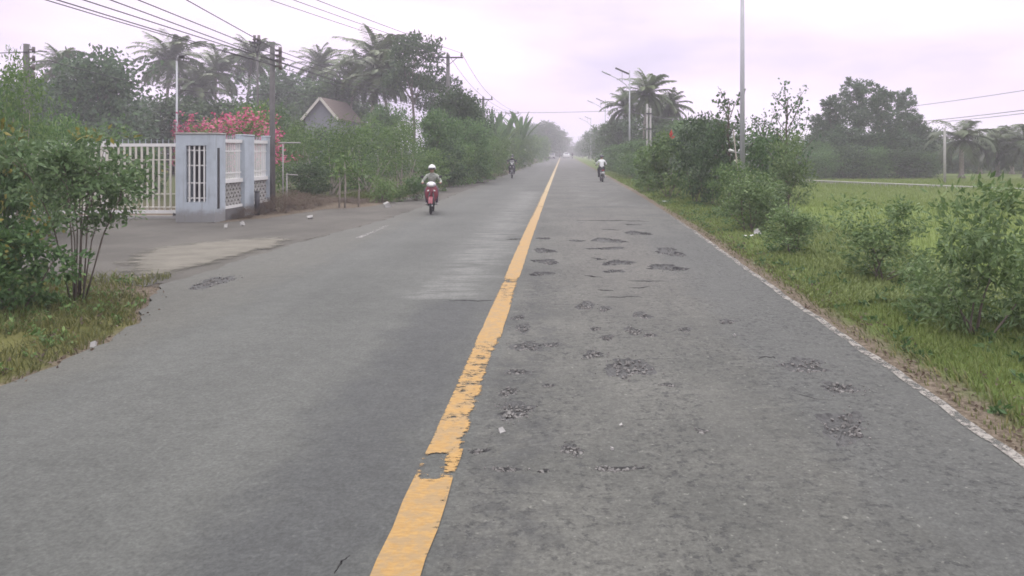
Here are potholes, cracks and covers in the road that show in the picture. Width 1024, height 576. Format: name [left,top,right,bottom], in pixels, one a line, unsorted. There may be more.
pothole [624,325,647,336]
pothole [595,352,664,382]
pothole [506,341,542,354]
pothole [772,356,848,377]
pothole [574,301,598,311]
pothole [187,274,243,290]
pothole [602,258,636,266]
pothole [581,347,609,359]
pothole [494,399,538,425]
pothole [559,441,585,458]
pothole [802,405,871,451]
pothole [820,381,870,396]
